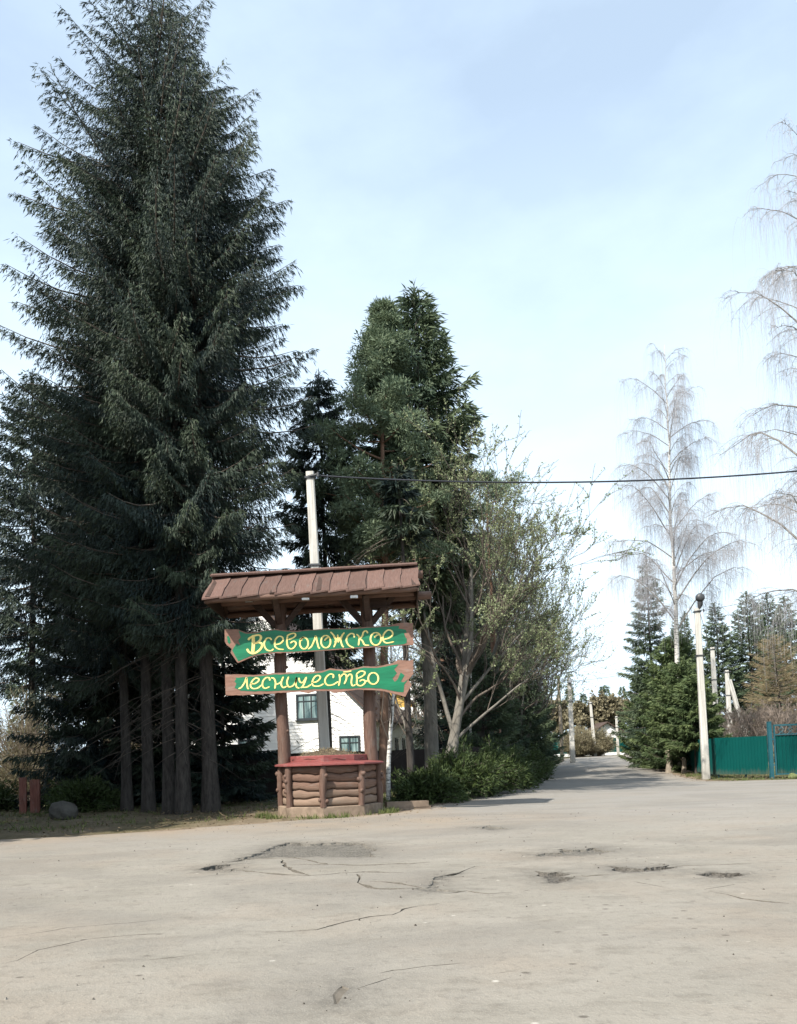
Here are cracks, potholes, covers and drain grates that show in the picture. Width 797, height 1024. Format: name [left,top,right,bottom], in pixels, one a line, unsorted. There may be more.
pothole [533,848,611,857]
pothole [233,843,376,862]
crack [2,919,164,961]
pothole [536,871,574,884]
pothole [607,865,675,873]
crack [234,857,508,932]
crack [357,963,459,989]
crack [708,884,789,904]
